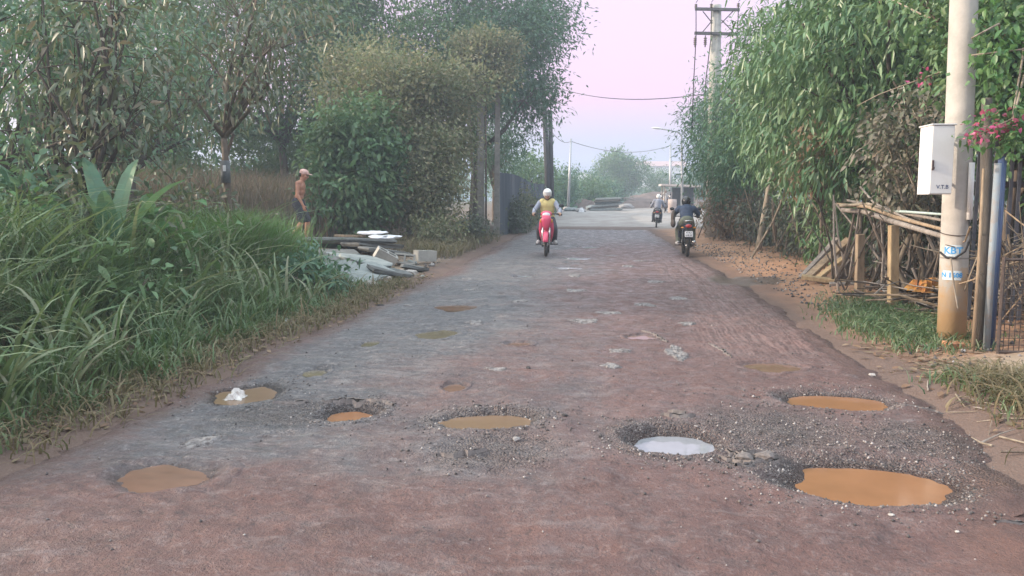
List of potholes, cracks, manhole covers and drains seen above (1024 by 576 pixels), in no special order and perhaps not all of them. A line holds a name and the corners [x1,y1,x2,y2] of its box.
pothole [406,327,468,341]
pothole [604,419,746,460]
pothole [417,405,558,434]
pothole [750,385,930,415]
pothole [730,359,814,377]
pothole [302,400,395,426]
pothole [726,445,1024,517]
pothole [79,454,245,502]
pothole [436,379,473,394]
pothole [184,375,304,411]
pothole [426,303,489,313]
